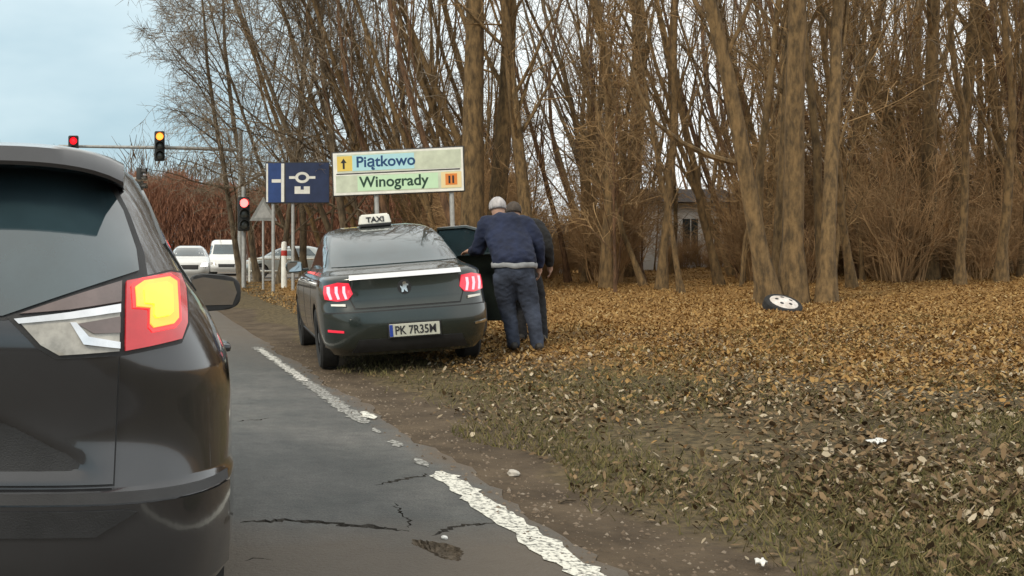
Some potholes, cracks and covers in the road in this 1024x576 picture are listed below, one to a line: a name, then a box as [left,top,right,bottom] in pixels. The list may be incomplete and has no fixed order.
pothole [412,539,464,561]
crack [377,473,427,485]
crack [240,503,412,531]
crack [432,523,493,536]
